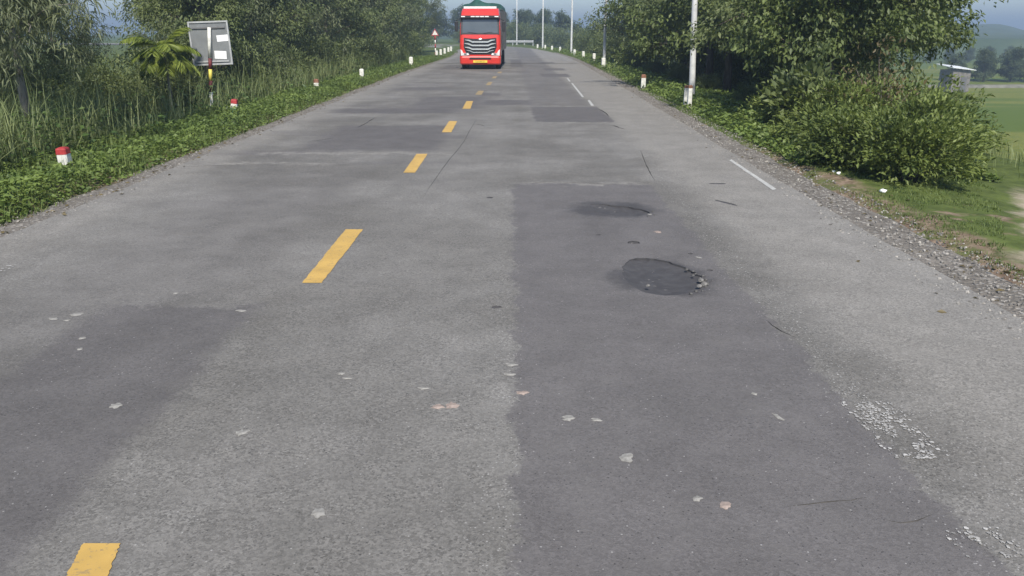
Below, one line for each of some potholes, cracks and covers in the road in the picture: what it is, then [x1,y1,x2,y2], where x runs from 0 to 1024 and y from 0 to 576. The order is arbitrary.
pothole [622,258,702,296]
pothole [591,204,649,216]
crack [795,497,866,506]
